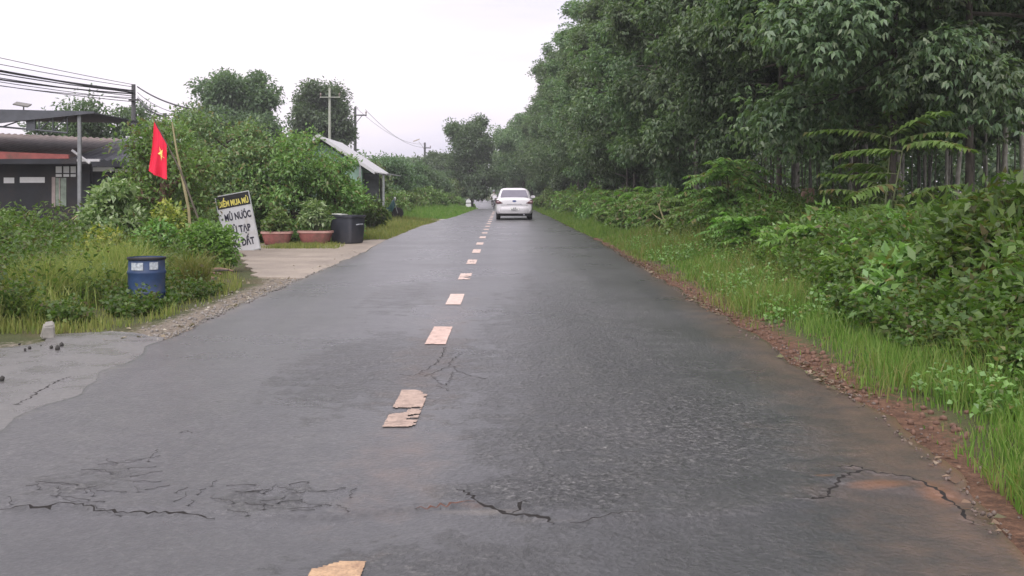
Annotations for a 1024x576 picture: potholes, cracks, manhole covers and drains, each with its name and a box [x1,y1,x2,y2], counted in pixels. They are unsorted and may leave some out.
crack [14,376,75,404]
crack [0,449,360,521]
crack [414,489,642,525]
crack [399,347,486,391]
crack [794,464,979,525]
